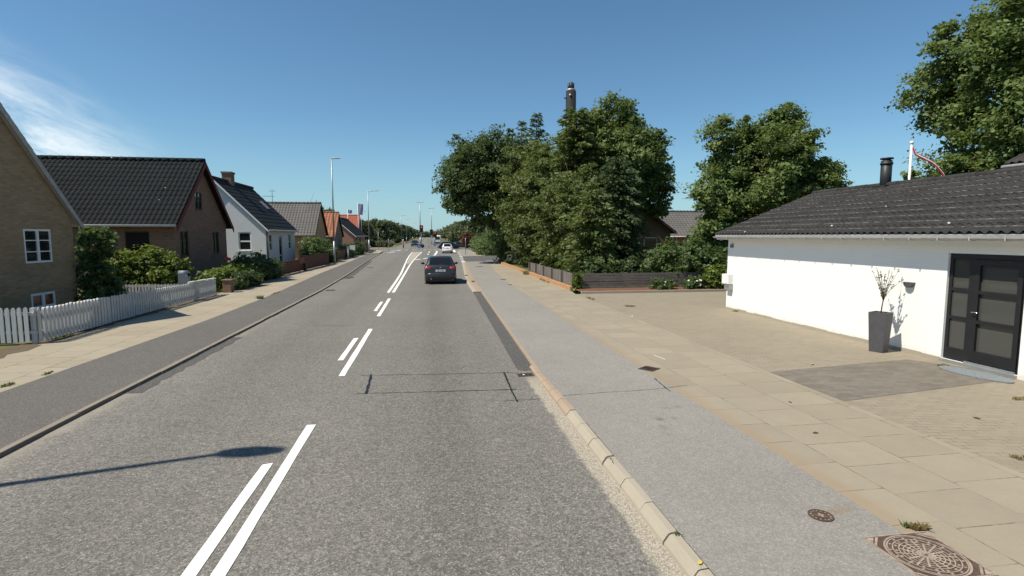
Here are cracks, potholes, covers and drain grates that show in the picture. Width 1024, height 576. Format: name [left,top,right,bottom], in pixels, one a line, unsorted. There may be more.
manhole cover [862,531,999,576]
manhole cover [808,509,834,522]
